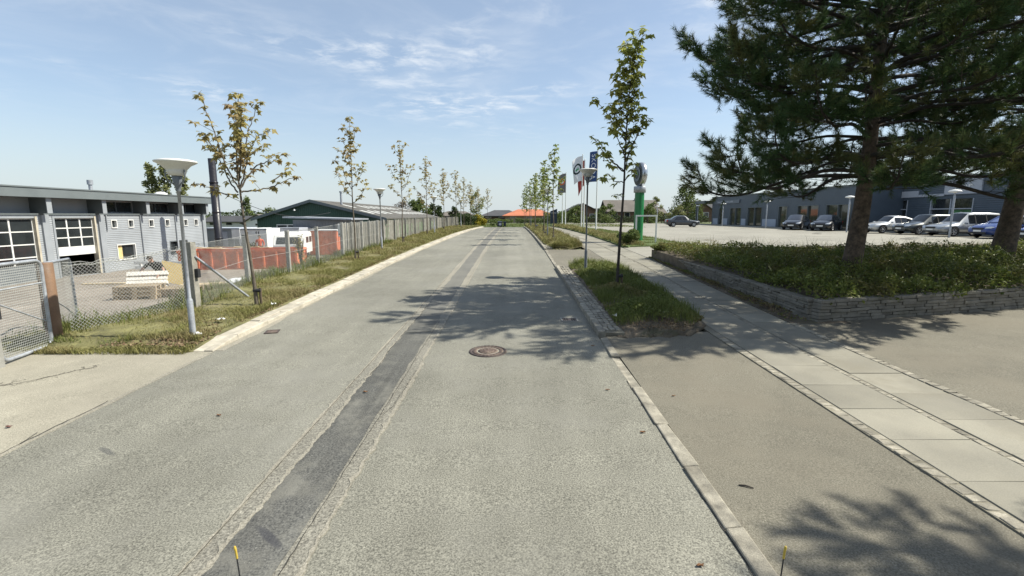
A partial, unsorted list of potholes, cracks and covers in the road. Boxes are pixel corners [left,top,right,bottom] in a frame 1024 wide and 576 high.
manhole cover [469,345,507,357]
crack [0,365,98,386]
